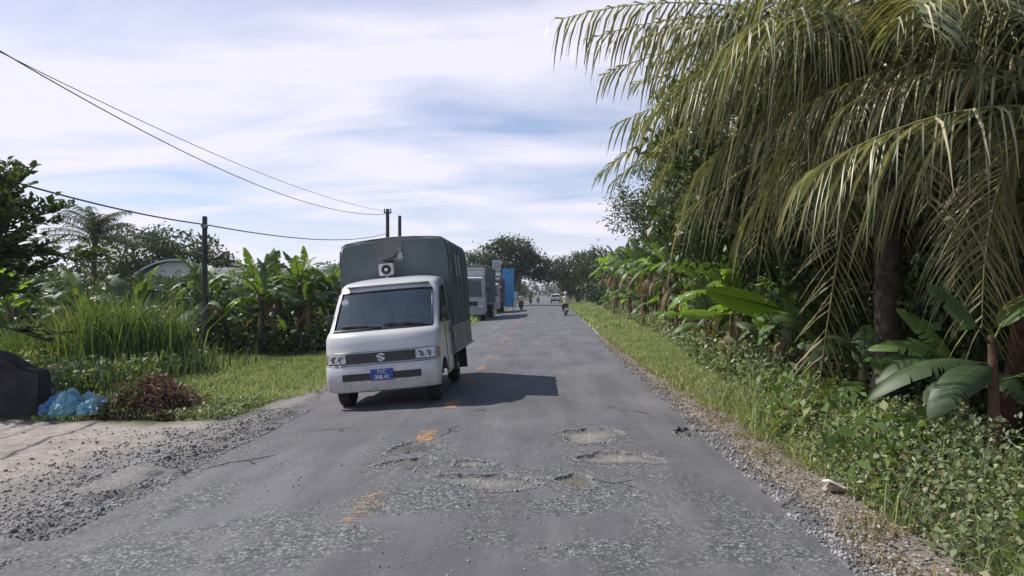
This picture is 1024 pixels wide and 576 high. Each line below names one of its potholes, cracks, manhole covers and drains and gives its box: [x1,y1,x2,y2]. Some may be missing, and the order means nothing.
pothole [569,450,669,465]
pothole [549,471,598,490]
pothole [671,425,708,438]
pothole [552,426,628,447]
pothole [422,471,549,493]
pothole [368,456,441,470]
pothole [382,440,444,455]
